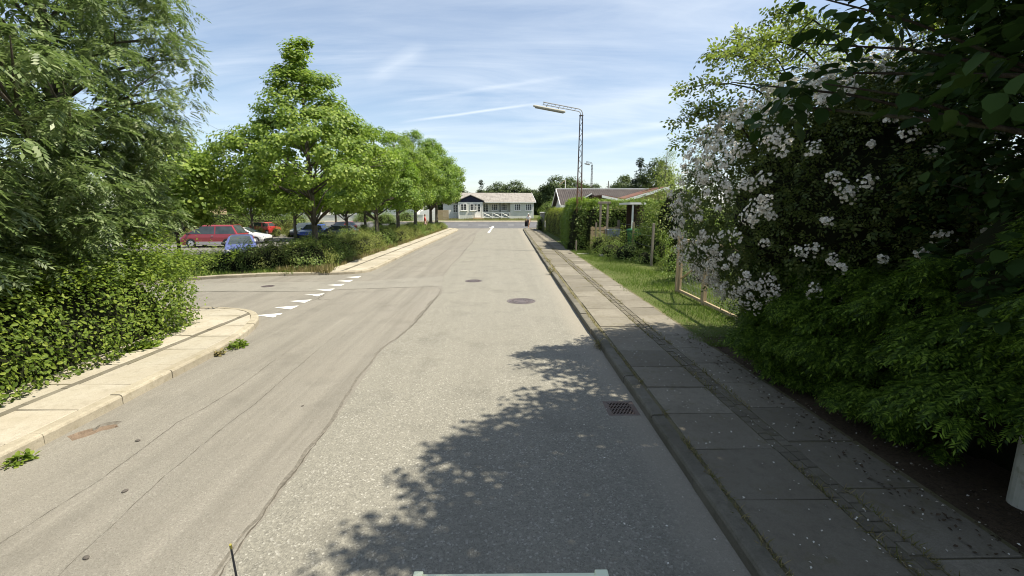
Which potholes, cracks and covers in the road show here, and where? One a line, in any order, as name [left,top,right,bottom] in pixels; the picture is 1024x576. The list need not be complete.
drain grate [602,401,640,416]
